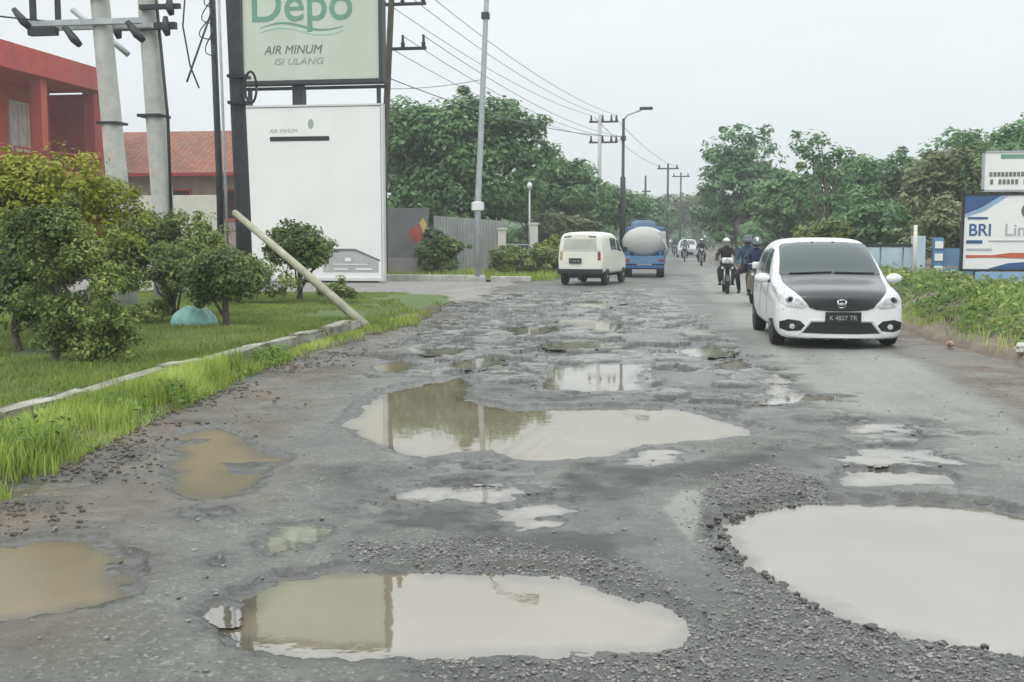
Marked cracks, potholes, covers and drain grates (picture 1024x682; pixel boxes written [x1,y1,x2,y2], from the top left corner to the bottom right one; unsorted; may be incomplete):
pothole [329,374,778,461]
pothole [248,519,337,558]
pothole [506,518,570,531]
pothole [153,423,298,501]
pothole [418,344,472,358]
pothole [189,557,717,664]
pothole [567,300,627,309]
pothole [672,346,741,360]
